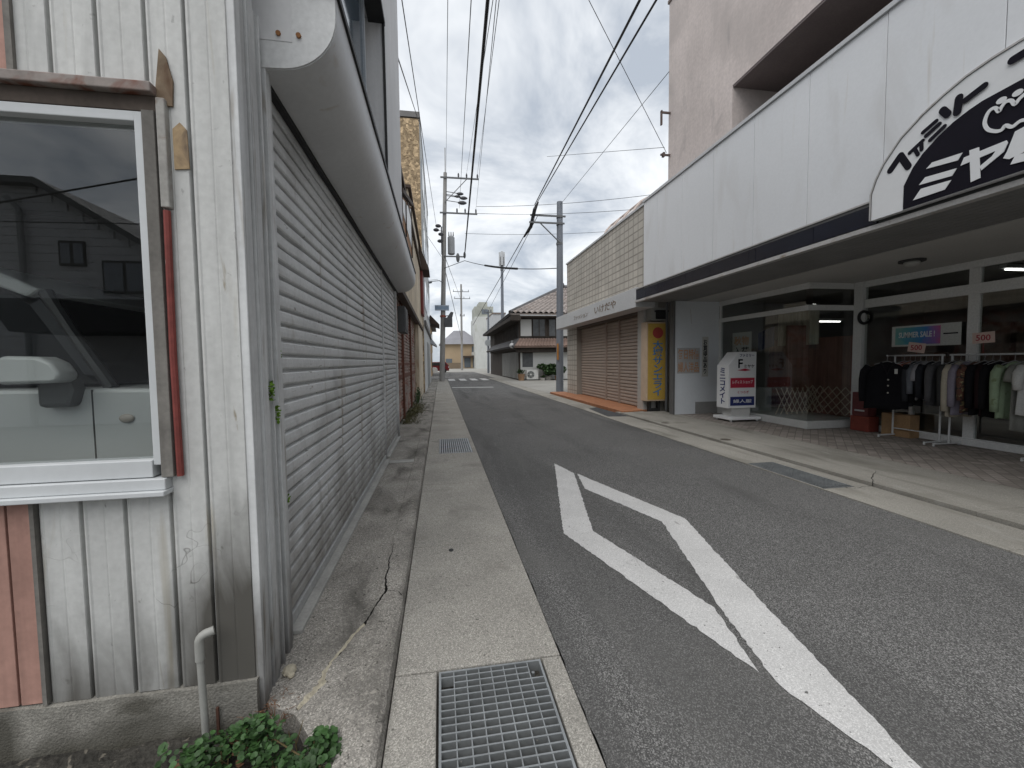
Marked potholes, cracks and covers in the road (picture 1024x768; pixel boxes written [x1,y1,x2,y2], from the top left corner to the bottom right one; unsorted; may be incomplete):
drain grate [439,659,577,768]
drain grate [747,462,854,489]
crack [297,546,406,710]
drain grate [439,438,473,454]
